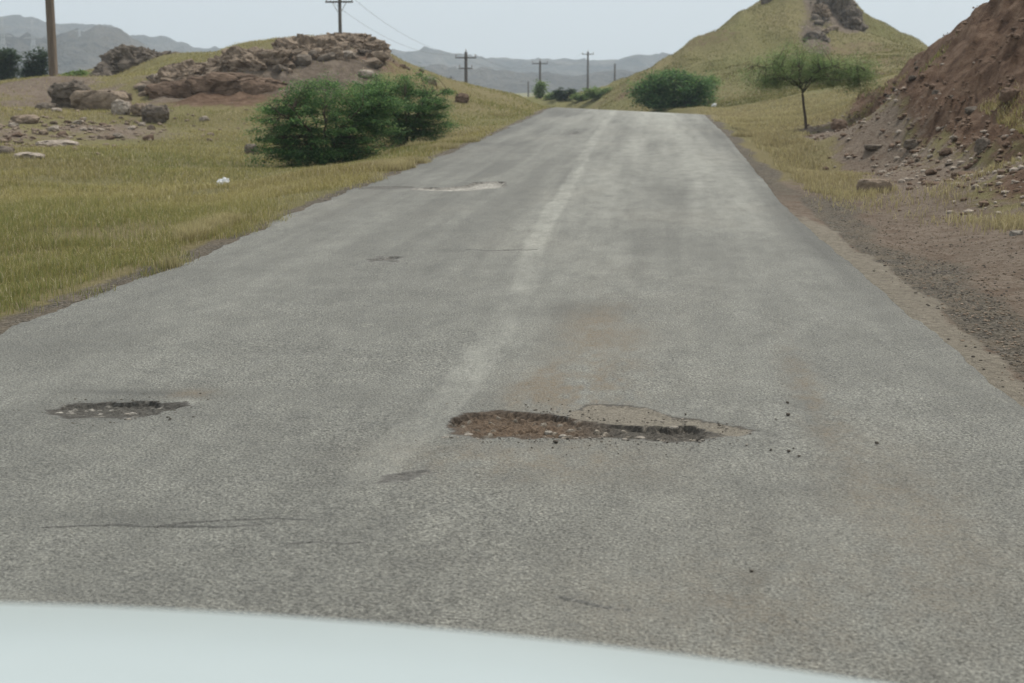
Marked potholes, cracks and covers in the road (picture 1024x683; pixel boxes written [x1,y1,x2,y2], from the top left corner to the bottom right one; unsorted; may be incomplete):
crack [40,518,364,545]
pothole [358,181,508,191]
crack [555,596,631,611]
pothole [446,404,756,443]
pothole [45,400,191,420]
